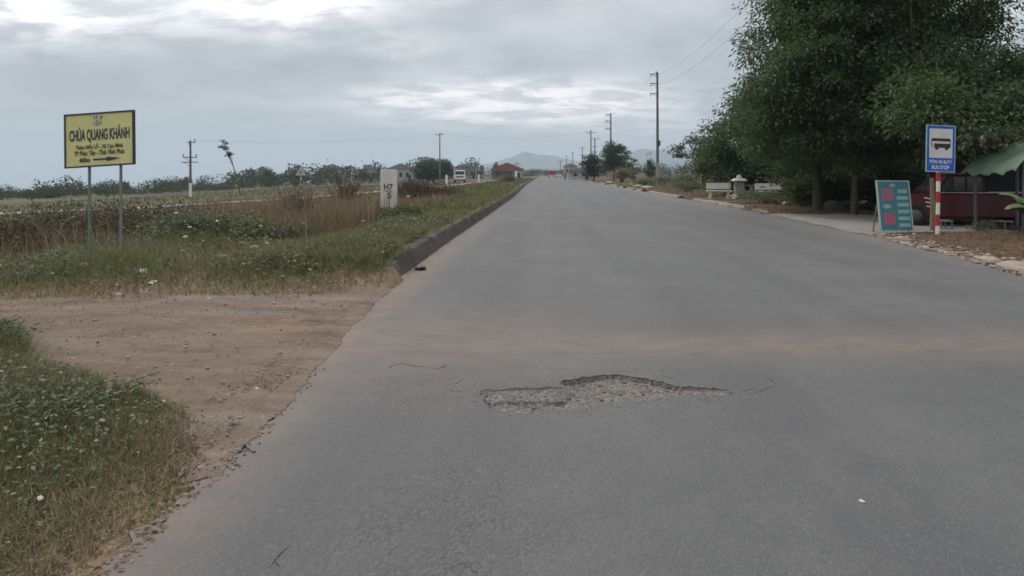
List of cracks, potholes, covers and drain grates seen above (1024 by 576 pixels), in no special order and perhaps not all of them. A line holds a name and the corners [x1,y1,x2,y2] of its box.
pothole [459,369,753,422]
crack [387,363,776,402]
